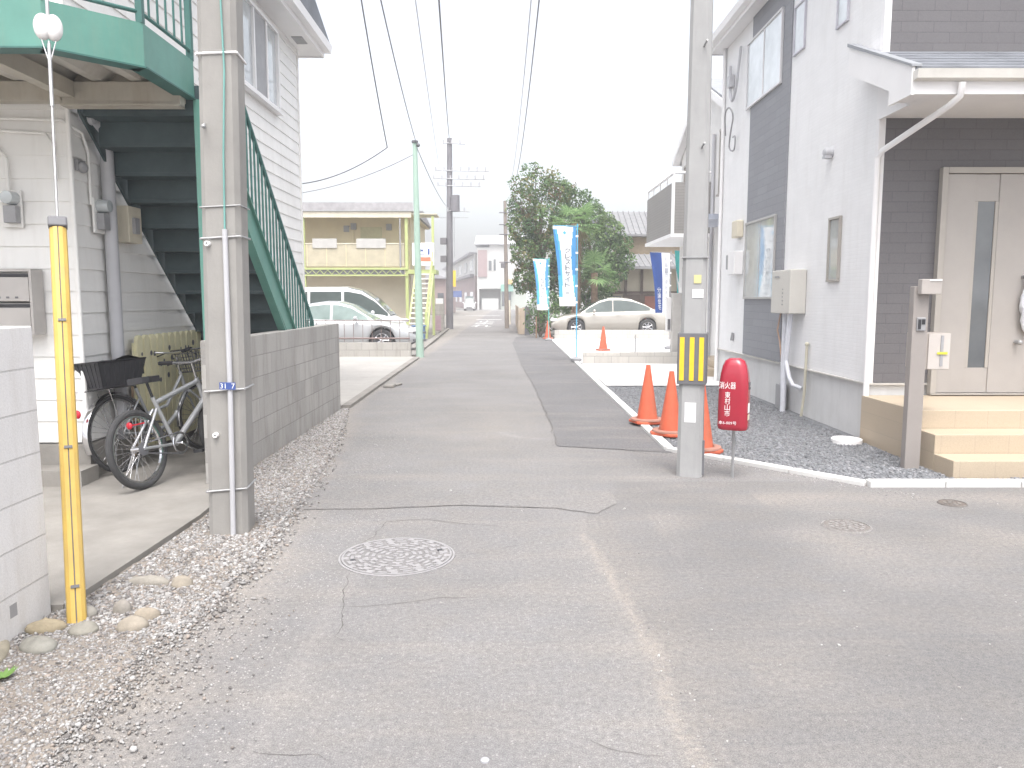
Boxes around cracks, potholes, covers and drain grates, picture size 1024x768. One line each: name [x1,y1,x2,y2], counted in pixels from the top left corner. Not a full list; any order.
manhole cover [338,538,455,577]
manhole cover [937,499,968,507]
crack [335,577,488,641]
manhole cover [821,519,872,533]
